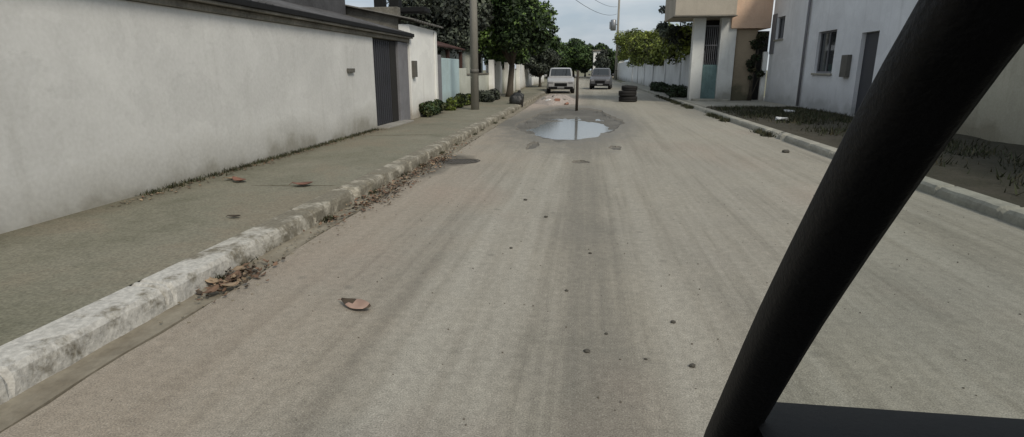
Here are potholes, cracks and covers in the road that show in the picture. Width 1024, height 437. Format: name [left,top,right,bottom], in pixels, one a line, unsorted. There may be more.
pothole [514,107,625,142]
